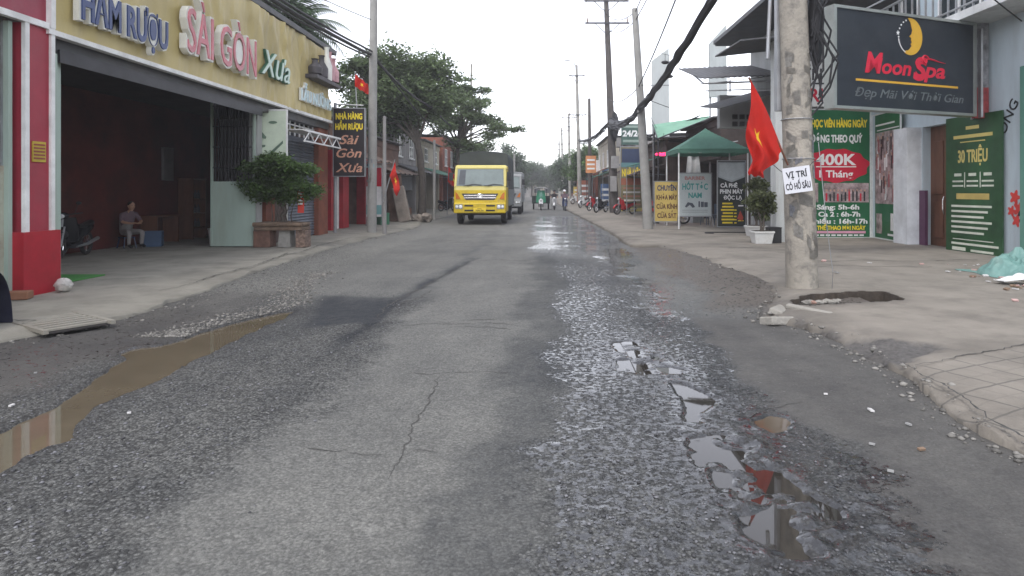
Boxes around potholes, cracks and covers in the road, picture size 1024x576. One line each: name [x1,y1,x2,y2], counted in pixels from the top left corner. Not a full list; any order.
pothole [660,378,727,427]
pothole [603,338,696,376]
pothole [0,308,300,480]
pothole [674,430,860,566]
pothole [743,412,803,437]
pothole [787,290,906,306]
crack [304,371,508,479]
drain grate [12,311,116,335]
